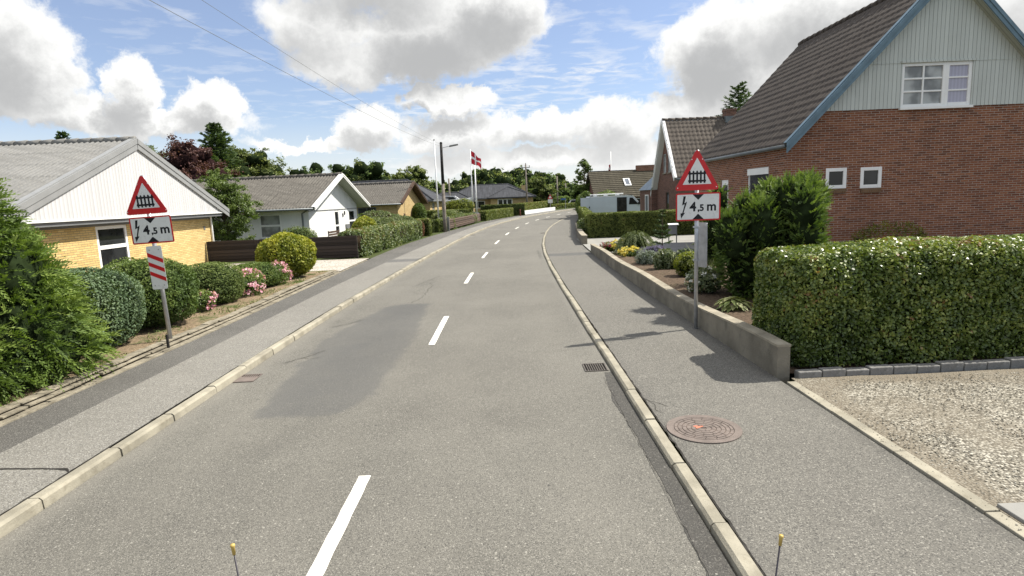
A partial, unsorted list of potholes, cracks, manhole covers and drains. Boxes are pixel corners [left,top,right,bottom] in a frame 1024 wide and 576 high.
drain grate [582,363,609,372]
drain grate [233,374,262,383]
manhole cover [666,415,743,444]
crack [578,304,766,576]
